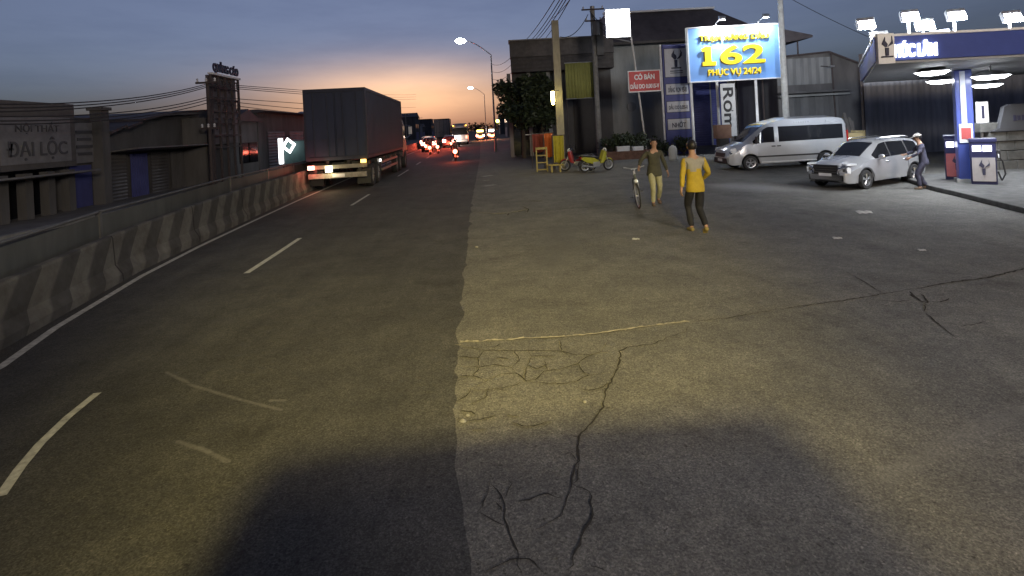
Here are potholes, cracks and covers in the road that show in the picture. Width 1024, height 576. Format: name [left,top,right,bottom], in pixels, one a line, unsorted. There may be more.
crack [455,323,690,573]
crack [847,272,984,336]
